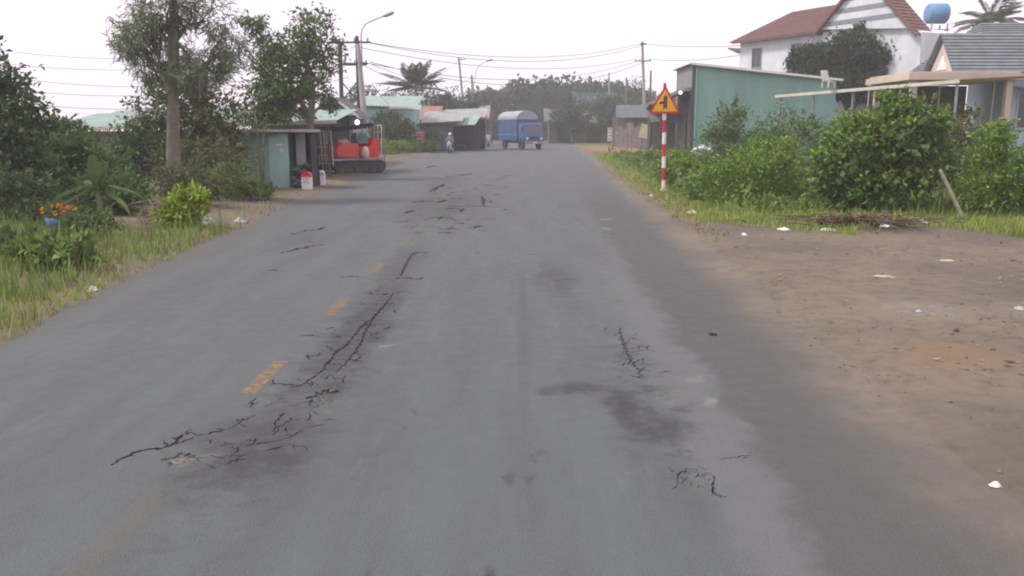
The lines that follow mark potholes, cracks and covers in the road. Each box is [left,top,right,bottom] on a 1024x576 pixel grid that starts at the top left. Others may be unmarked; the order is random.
crack [669,455,750,498]
crack [111,252,427,469]
crack [604,327,667,379]
